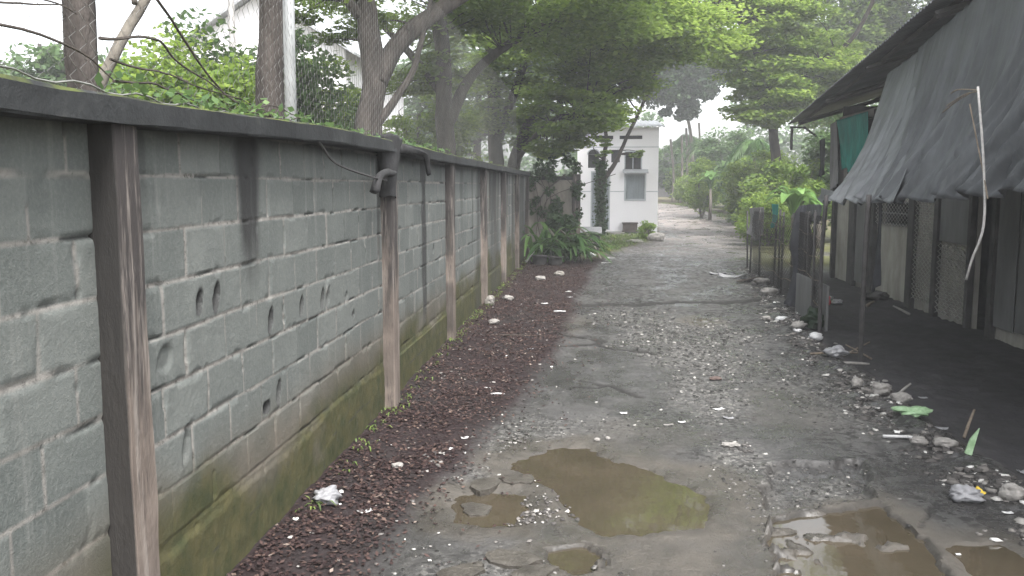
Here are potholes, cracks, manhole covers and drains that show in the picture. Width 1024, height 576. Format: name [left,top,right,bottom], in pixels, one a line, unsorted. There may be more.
crack [569,379,650,399]
pothole [541,542,607,576]
pothole [431,484,549,530]
pothole [925,537,1024,576]
pothole [485,440,732,540]
pothole [760,499,959,576]
crack [564,297,771,308]
